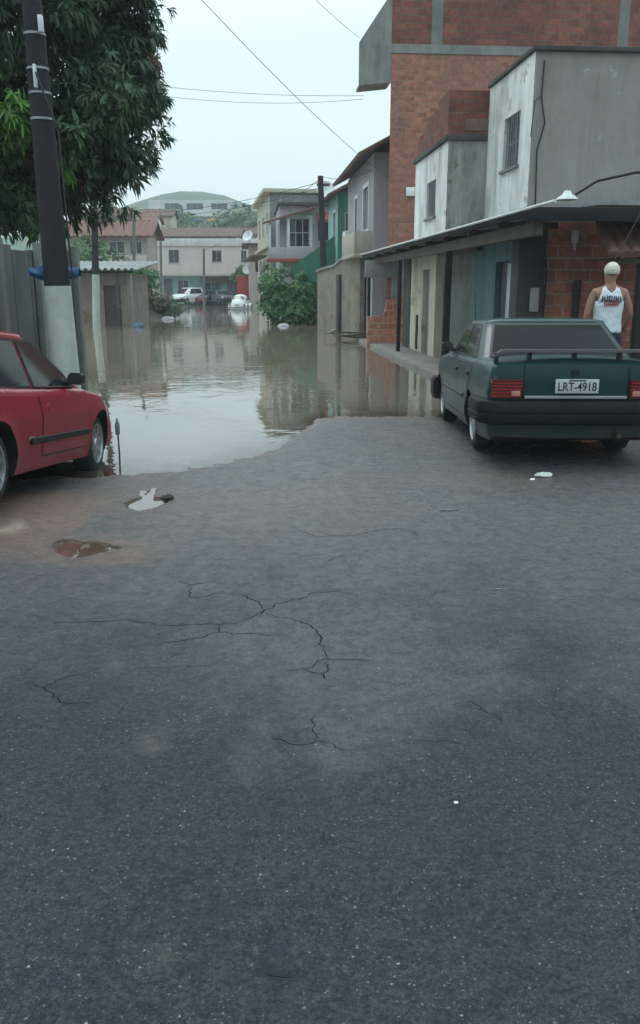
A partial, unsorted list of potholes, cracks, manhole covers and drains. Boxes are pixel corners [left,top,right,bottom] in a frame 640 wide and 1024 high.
crack [27,675,91,704]
crack [57,581,376,679]
crack [271,717,348,751]
pothole [52,539,121,558]
